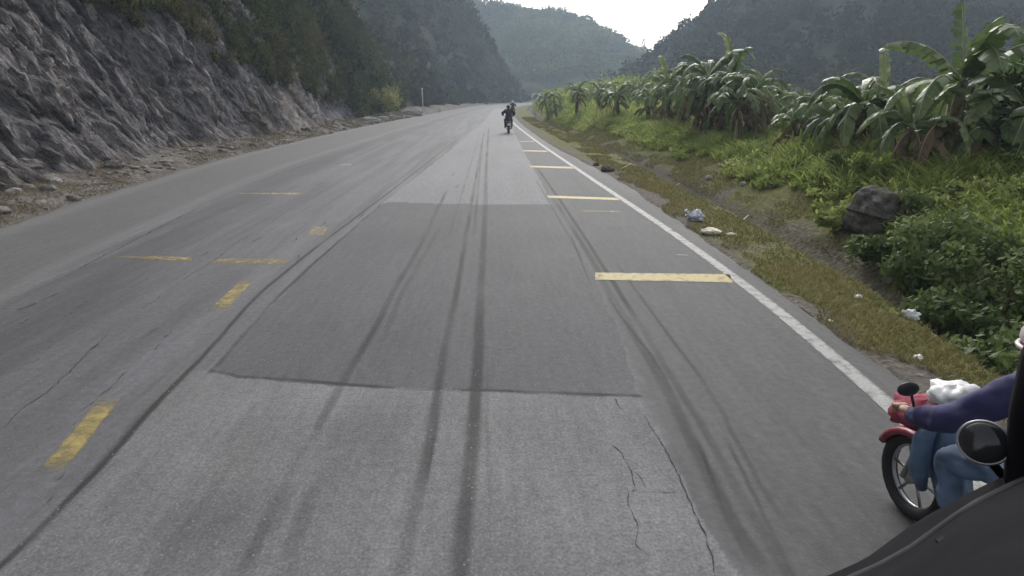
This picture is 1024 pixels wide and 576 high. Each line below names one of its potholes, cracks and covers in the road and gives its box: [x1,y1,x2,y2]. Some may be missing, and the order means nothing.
crack [8,334,107,423]
crack [614,415,716,576]
